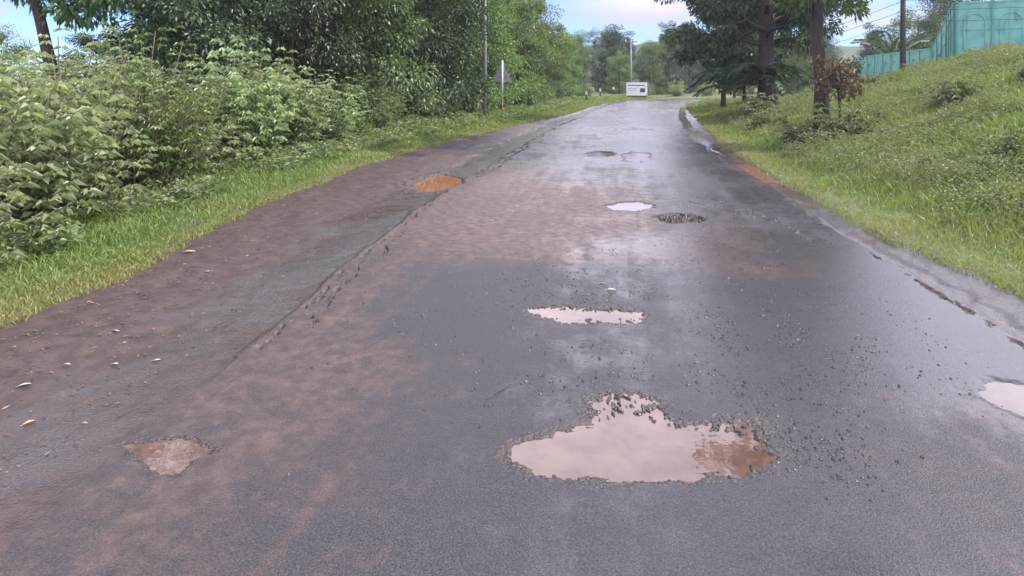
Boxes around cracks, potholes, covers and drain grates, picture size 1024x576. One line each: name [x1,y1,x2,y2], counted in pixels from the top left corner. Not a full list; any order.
pothole [650,212,713,224]
pothole [407,174,467,193]
pothole [116,434,226,479]
pothole [521,303,652,326]
pothole [493,388,789,491]
pothole [601,200,658,212]
pothole [619,152,653,163]
